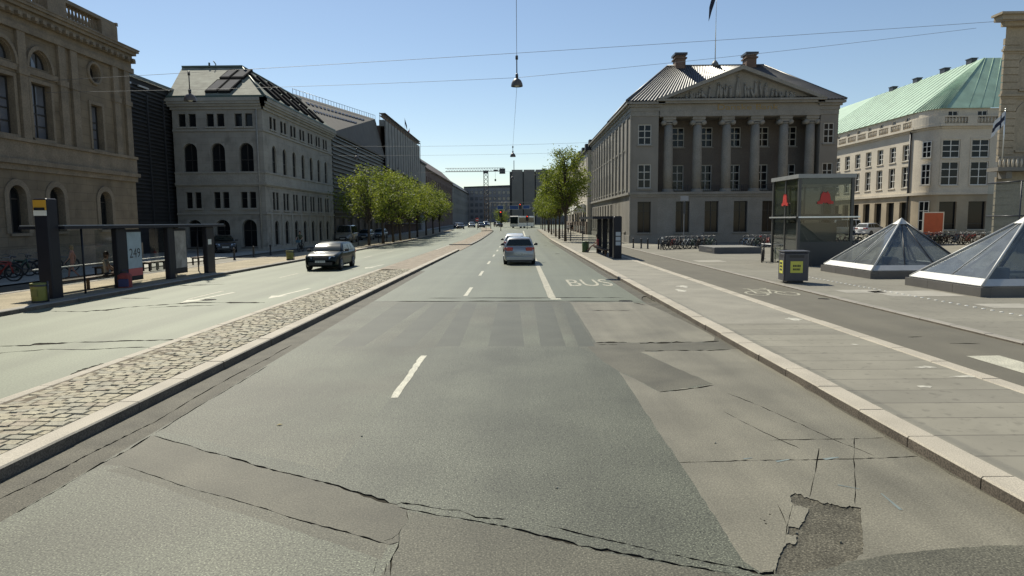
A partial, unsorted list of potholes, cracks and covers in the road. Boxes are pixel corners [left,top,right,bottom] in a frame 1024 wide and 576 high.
pothole [763,493,864,576]
crack [4,339,174,353]
crack [0,347,774,575]
crack [662,385,917,501]
